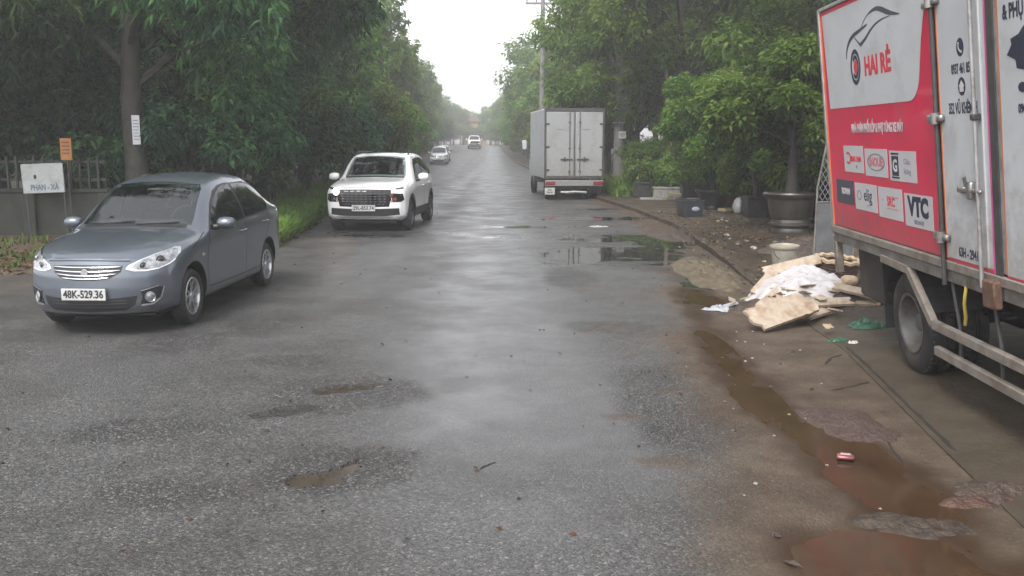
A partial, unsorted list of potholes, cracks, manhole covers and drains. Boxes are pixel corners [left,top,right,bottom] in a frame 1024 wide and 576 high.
pothole [236,401,335,423]
pothole [297,380,399,399]
pothole [263,453,388,493]
